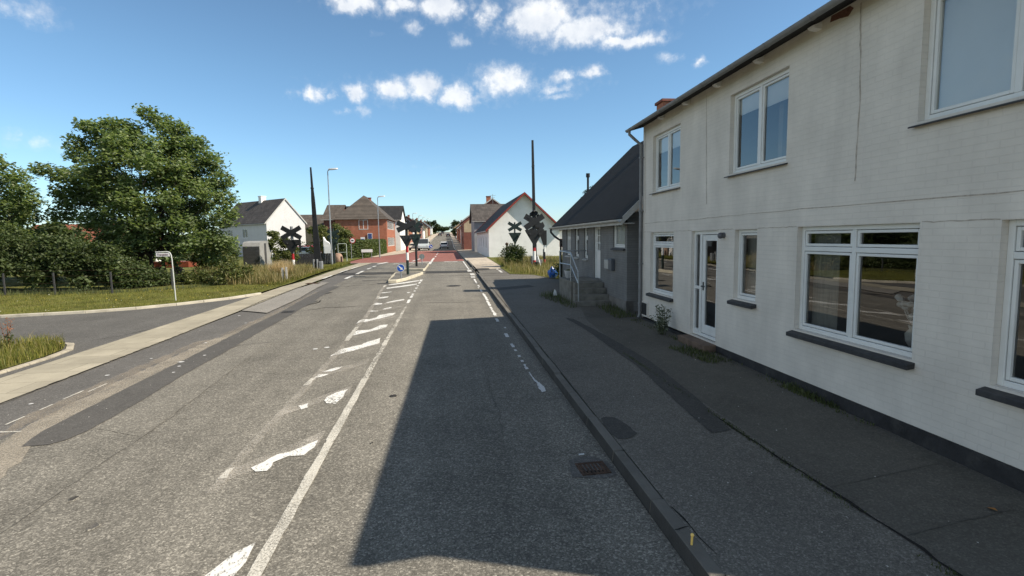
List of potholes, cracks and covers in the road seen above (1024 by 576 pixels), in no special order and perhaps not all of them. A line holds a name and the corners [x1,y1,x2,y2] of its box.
drain grate [575,461,612,476]
